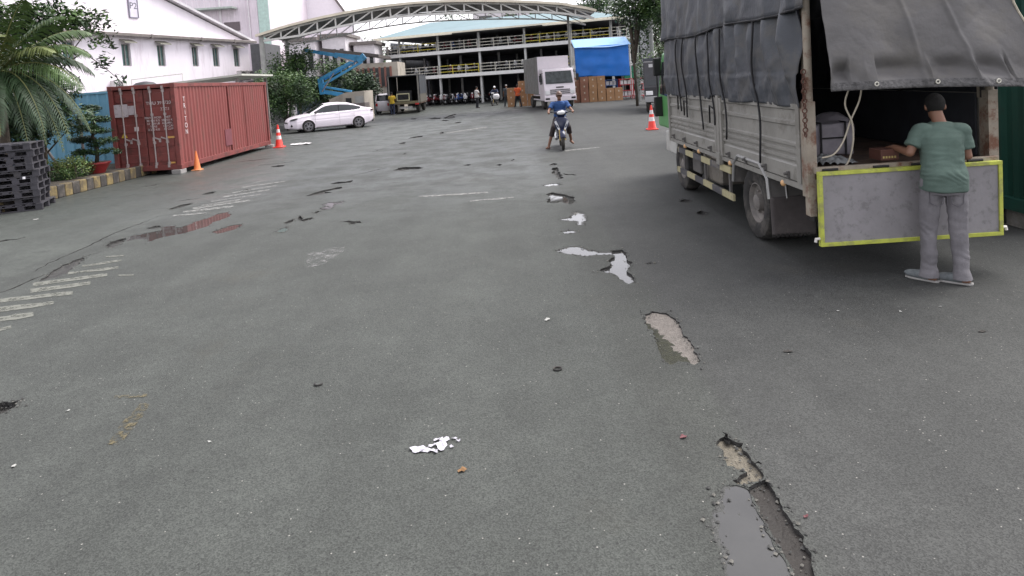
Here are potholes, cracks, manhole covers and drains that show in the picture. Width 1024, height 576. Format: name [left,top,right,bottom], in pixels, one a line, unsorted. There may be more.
pothole [546,191,577,204]
pothole [713,435,772,487]
pothole [0,397,28,414]
pothole [597,247,639,284]
pothole [748,478,819,576]
pothole [640,309,705,370]
